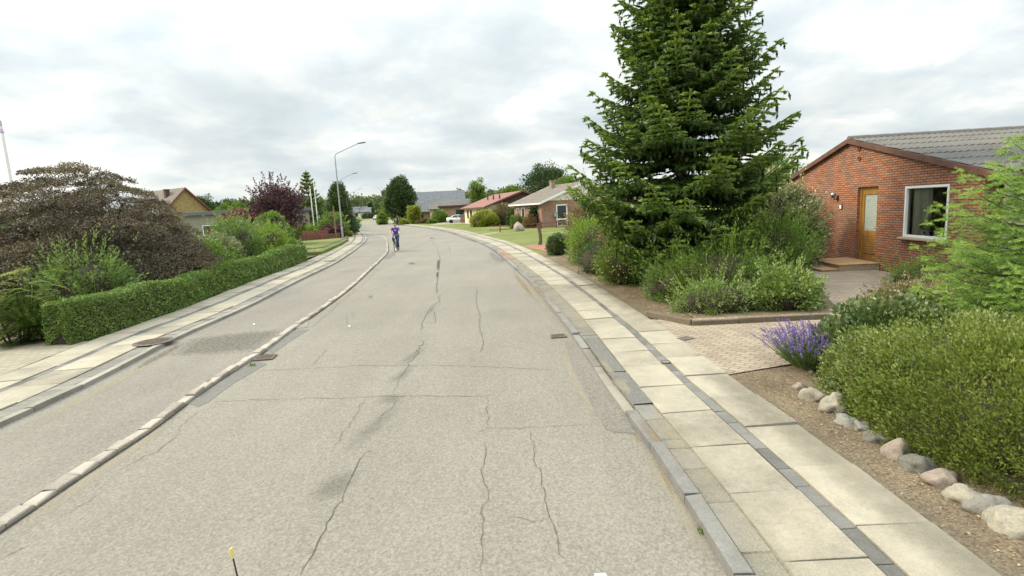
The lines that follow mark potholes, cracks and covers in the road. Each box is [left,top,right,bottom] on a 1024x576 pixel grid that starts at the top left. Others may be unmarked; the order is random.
manhole cover [132,337,174,347]
crack [122,248,569,574]
